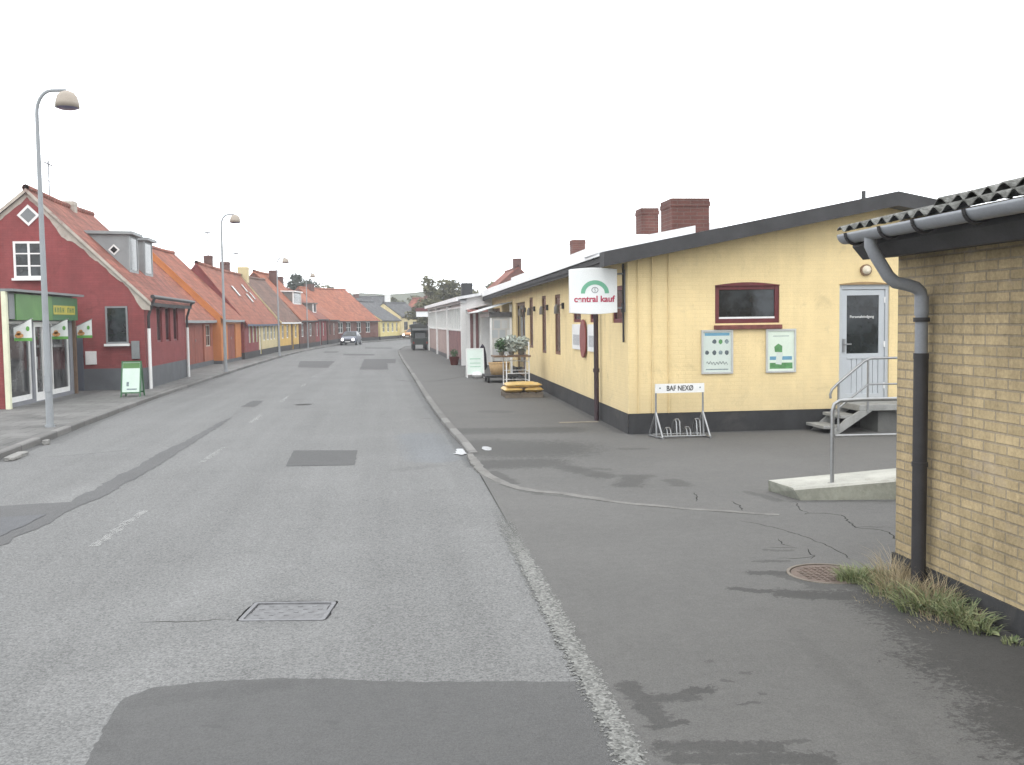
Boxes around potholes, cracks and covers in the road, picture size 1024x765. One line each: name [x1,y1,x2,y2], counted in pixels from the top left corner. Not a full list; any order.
crack [795,502,895,539]
crack [732,501,849,559]
manhole cover [786,563,863,584]
manhole cover [236,601,338,621]
